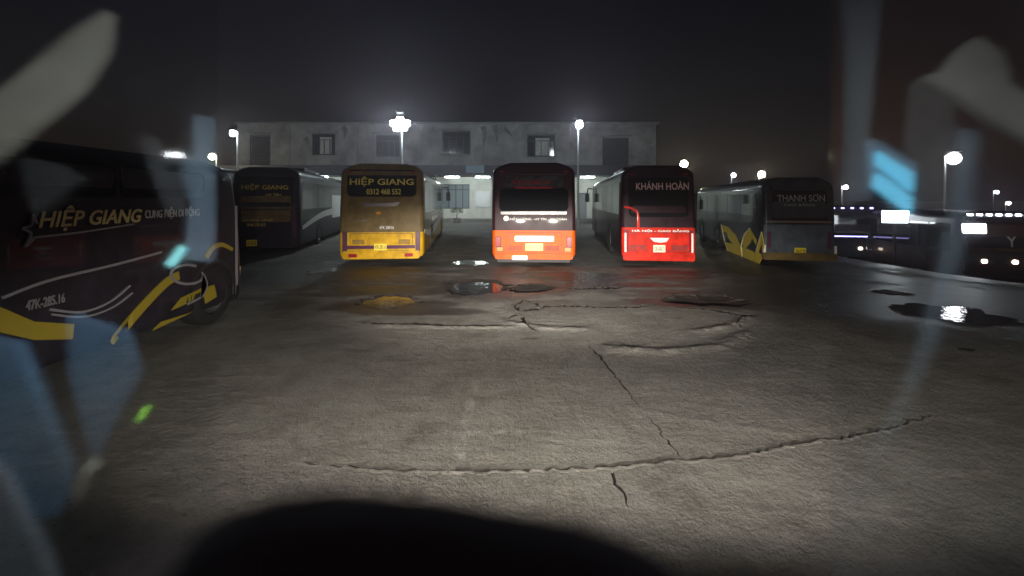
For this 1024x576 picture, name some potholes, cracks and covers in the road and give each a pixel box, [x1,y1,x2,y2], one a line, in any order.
crack [297,410,935,509]
pothole [661,294,753,307]
crack [686,307,767,329]
crack [360,286,661,340]
pothole [443,279,521,296]
pothole [500,283,557,293]
